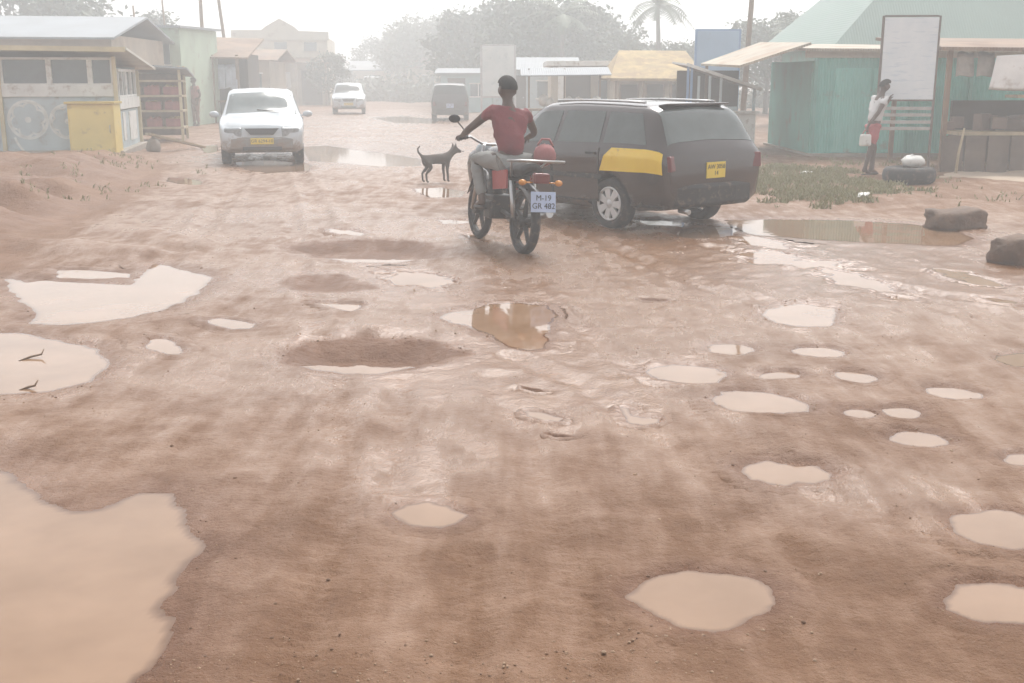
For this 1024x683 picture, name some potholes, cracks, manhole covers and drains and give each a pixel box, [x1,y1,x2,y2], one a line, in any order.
pothole [0,423,318,683]
pothole [914,496,1024,562]
pothole [907,563,1024,638]
pothole [413,299,584,361]
pothole [120,332,203,360]
pothole [712,446,865,496]
pothole [578,554,822,651]
pothole [259,235,474,267]
pothole [741,298,861,330]
pothole [186,315,275,334]
pothole [262,269,393,298]
pothole [904,377,1007,402]
